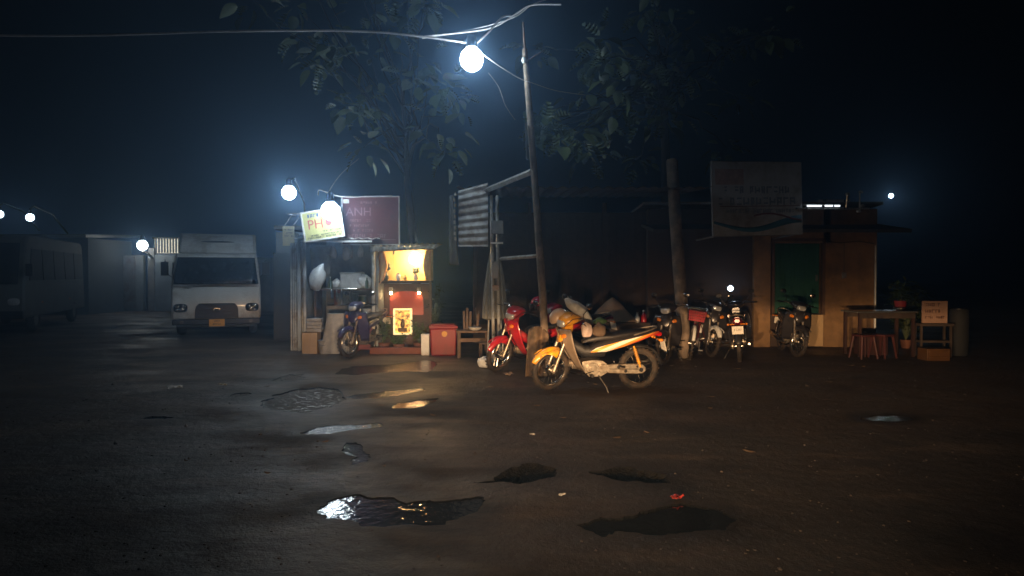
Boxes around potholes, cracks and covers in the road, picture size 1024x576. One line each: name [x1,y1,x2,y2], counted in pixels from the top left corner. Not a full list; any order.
pothole [316,494,485,527]
pothole [577,503,738,537]
pothole [260,387,347,413]
pothole [301,423,384,434]
pothole [473,463,558,484]
pothole [588,466,671,483]
